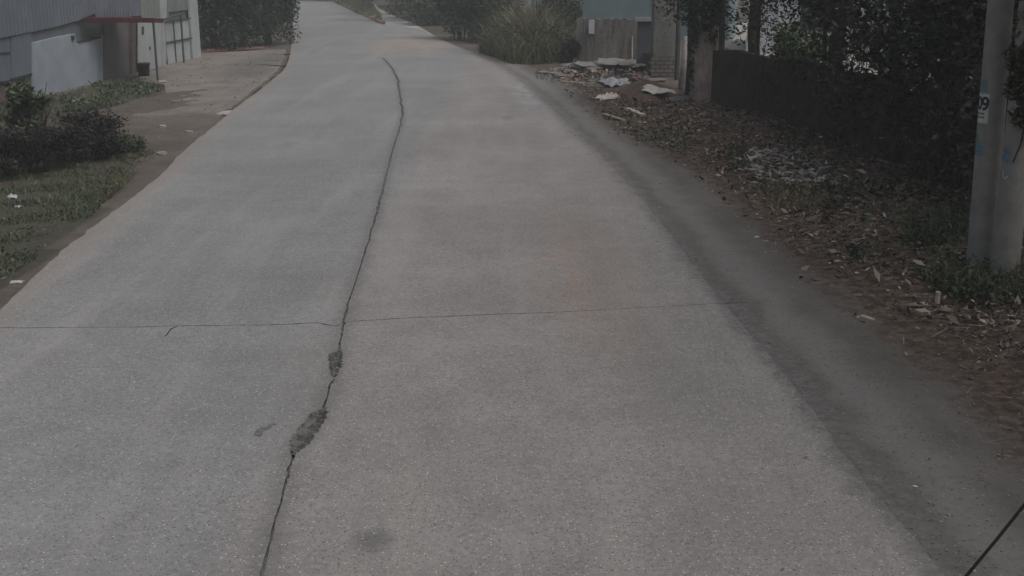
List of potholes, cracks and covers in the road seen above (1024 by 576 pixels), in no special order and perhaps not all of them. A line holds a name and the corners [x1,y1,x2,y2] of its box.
pothole [327,347,343,380]
pothole [288,407,328,456]
